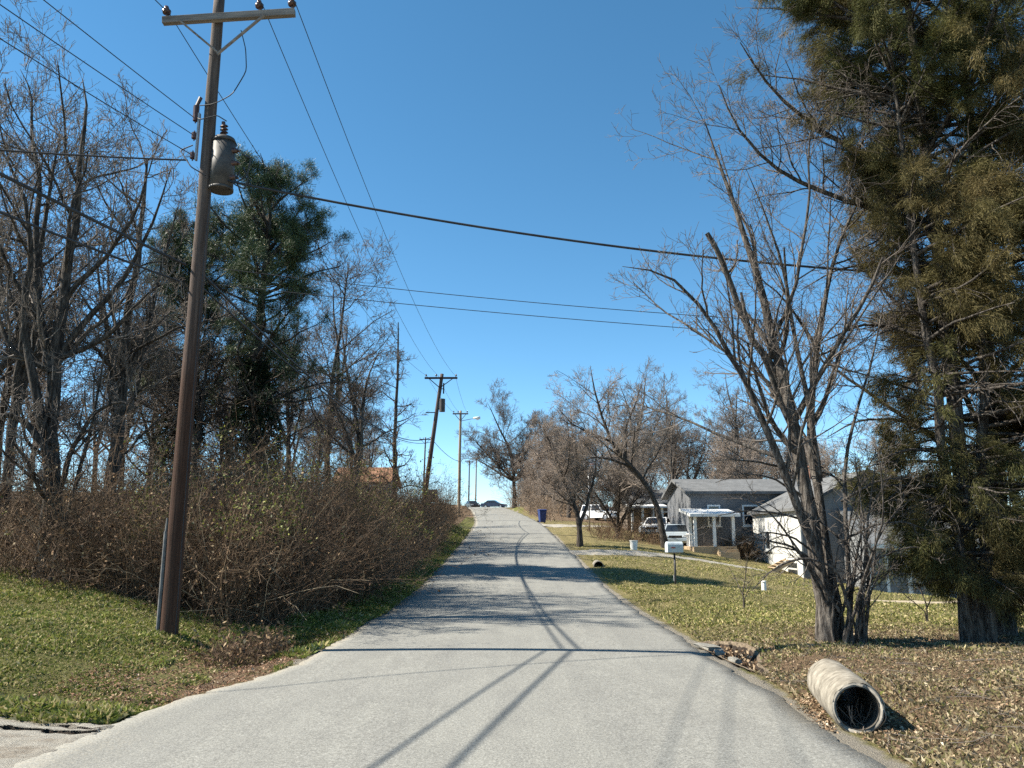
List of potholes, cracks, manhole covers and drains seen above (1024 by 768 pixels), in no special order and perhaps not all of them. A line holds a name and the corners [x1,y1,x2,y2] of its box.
crack [0,724,101,735]
